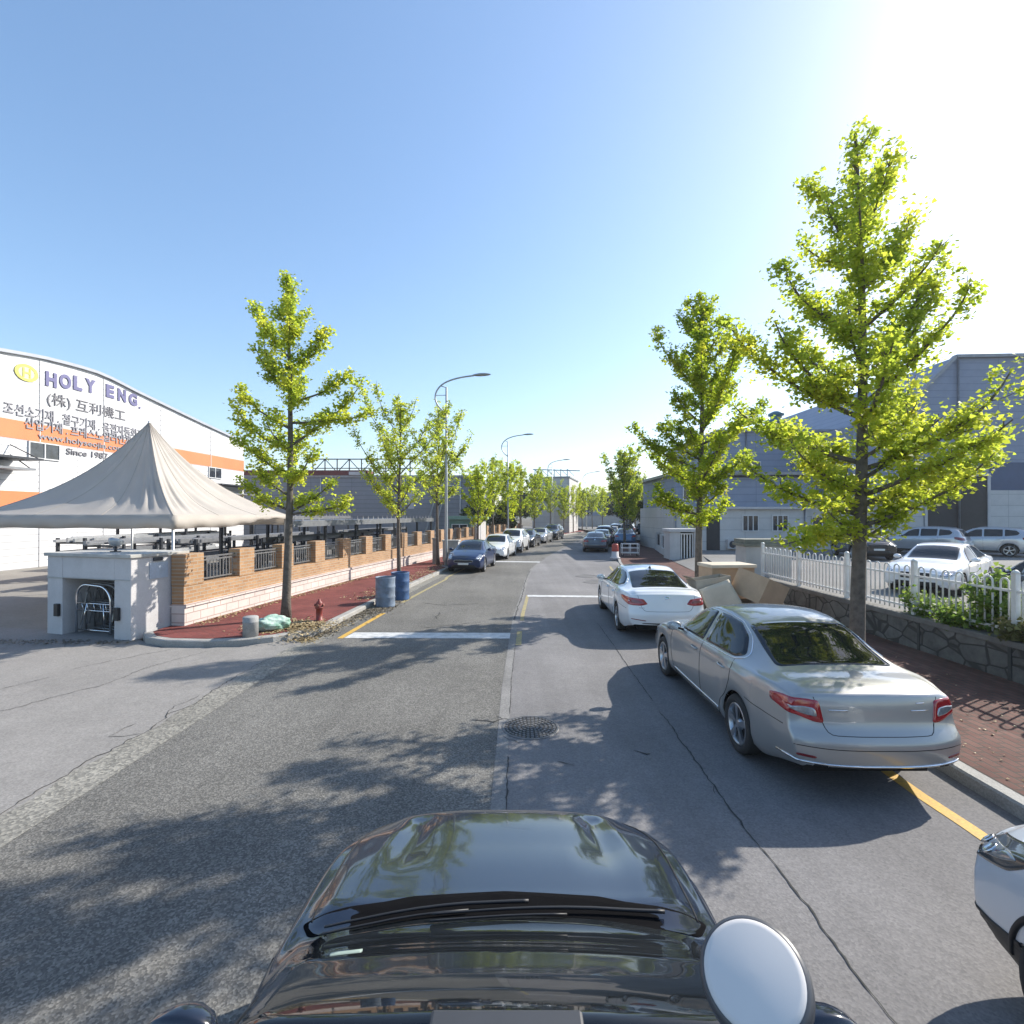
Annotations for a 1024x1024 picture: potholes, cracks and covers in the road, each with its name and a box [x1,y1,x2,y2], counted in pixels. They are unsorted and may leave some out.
crack [598,624,897,1024]
crack [478,650,519,810]
crack [1,657,273,814]
manhole cover [501,716,559,740]
